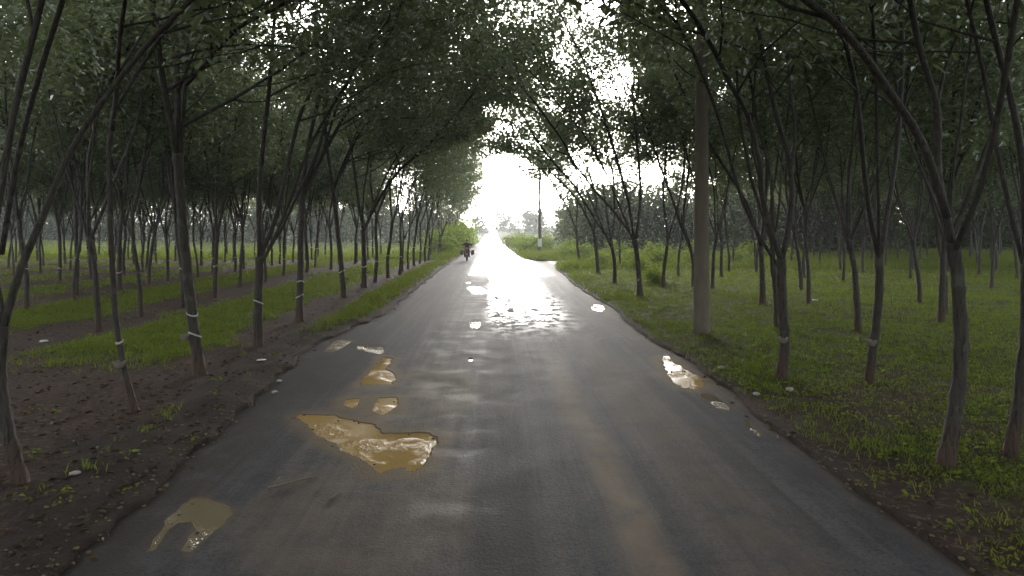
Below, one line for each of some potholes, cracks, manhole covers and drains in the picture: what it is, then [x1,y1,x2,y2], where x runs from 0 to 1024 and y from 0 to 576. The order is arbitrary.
pothole [294,414,441,473]
pothole [343,398,360,408]
pothole [146,496,239,553]
pothole [359,357,397,386]
pothole [372,397,399,414]
pothole [658,355,706,390]
